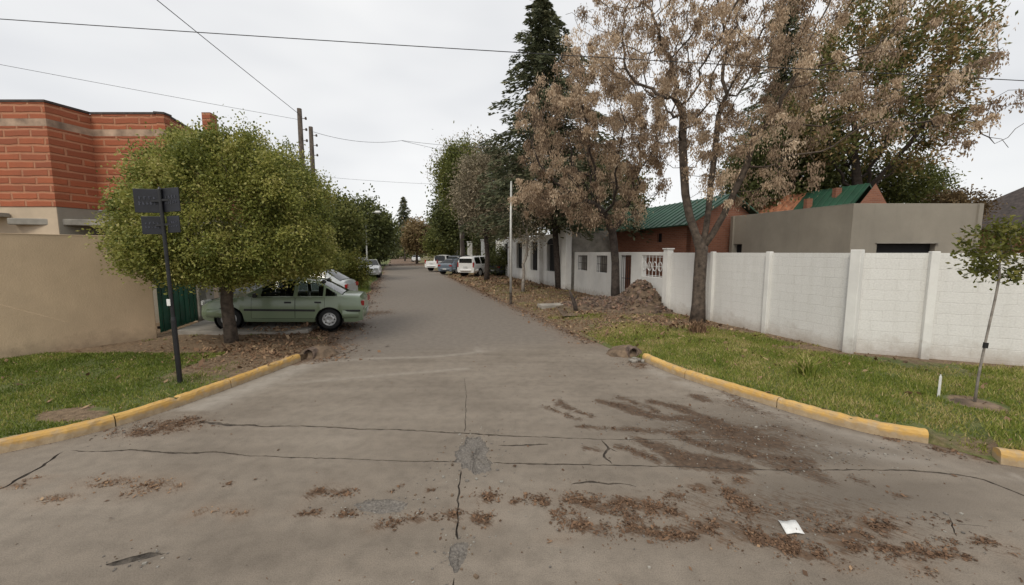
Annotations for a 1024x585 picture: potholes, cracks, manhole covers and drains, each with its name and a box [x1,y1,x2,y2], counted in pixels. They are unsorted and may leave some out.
pothole [106,552,165,566]
crack [199,378,1024,496]
crack [0,449,462,585]
